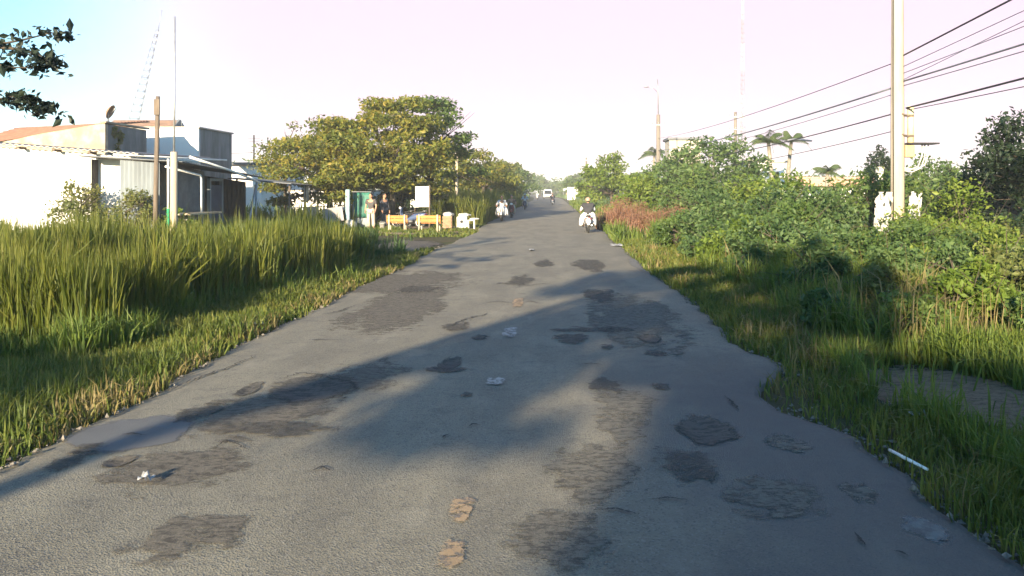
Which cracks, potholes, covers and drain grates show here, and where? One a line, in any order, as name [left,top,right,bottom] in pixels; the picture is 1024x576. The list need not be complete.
pothole [437,357,462,369]
pothole [675,415,742,446]
